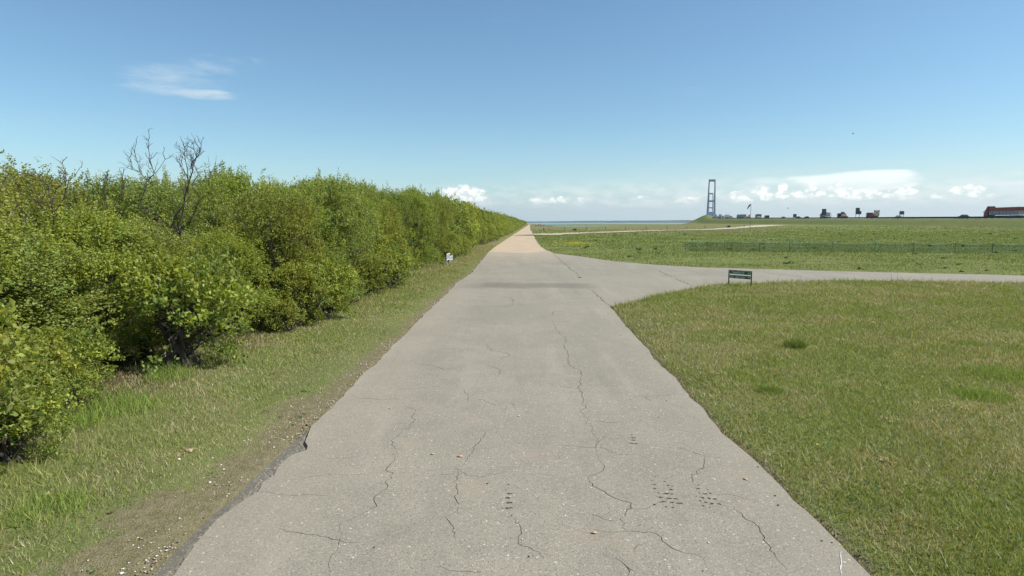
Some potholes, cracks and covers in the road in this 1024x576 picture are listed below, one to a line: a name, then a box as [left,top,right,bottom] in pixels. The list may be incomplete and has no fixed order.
crack [552,312,705,575]
crack [339,408,416,532]
crack [715,494,787,569]
crack [446,431,496,537]
crack [282,529,356,572]
